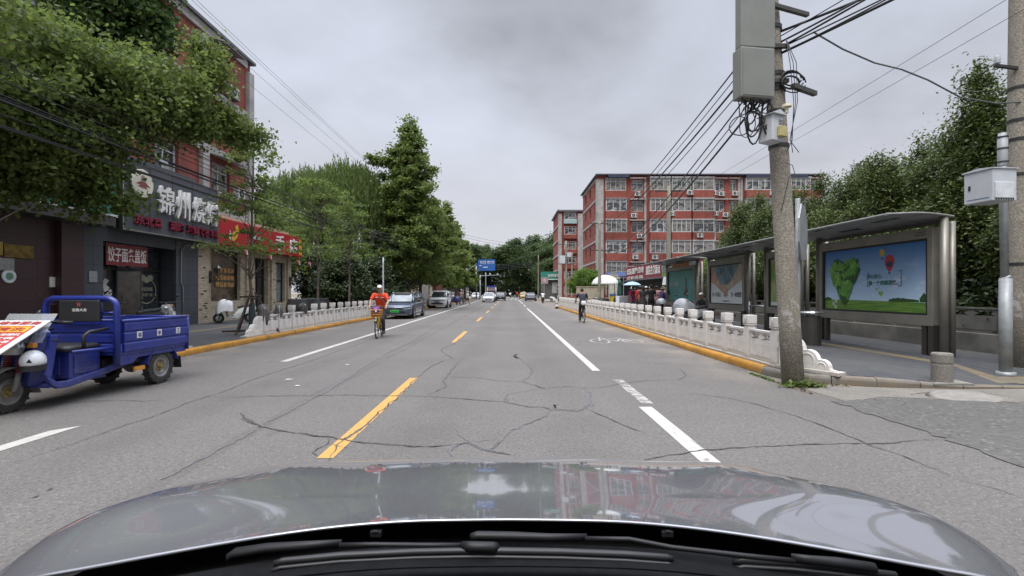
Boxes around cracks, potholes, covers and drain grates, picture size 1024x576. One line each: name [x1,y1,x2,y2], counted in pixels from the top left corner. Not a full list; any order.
crack [239,339,947,474]
